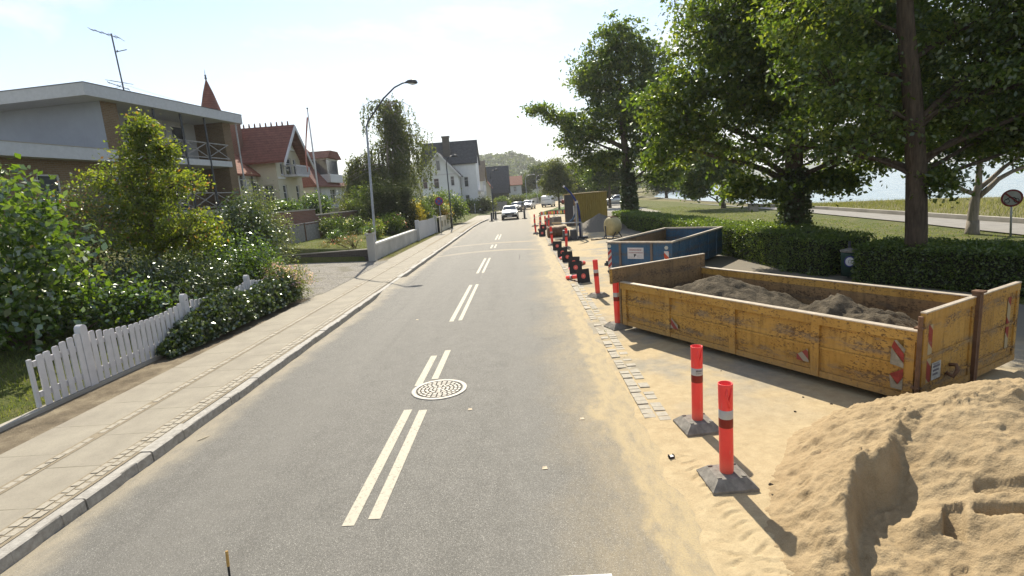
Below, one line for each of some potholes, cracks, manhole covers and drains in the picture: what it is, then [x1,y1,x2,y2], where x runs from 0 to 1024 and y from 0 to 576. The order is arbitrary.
manhole cover [411,379,467,400]
